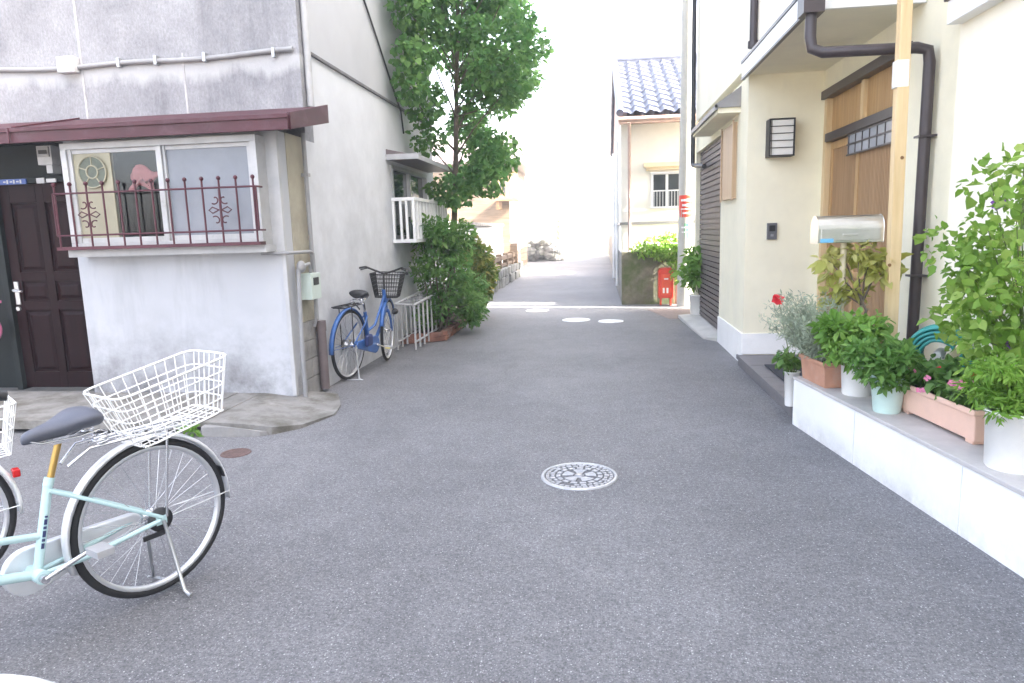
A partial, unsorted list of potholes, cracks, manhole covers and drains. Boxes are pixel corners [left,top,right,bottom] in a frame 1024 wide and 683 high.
utility cover [220,448,252,458]
manhole cover [541,462,618,491]
